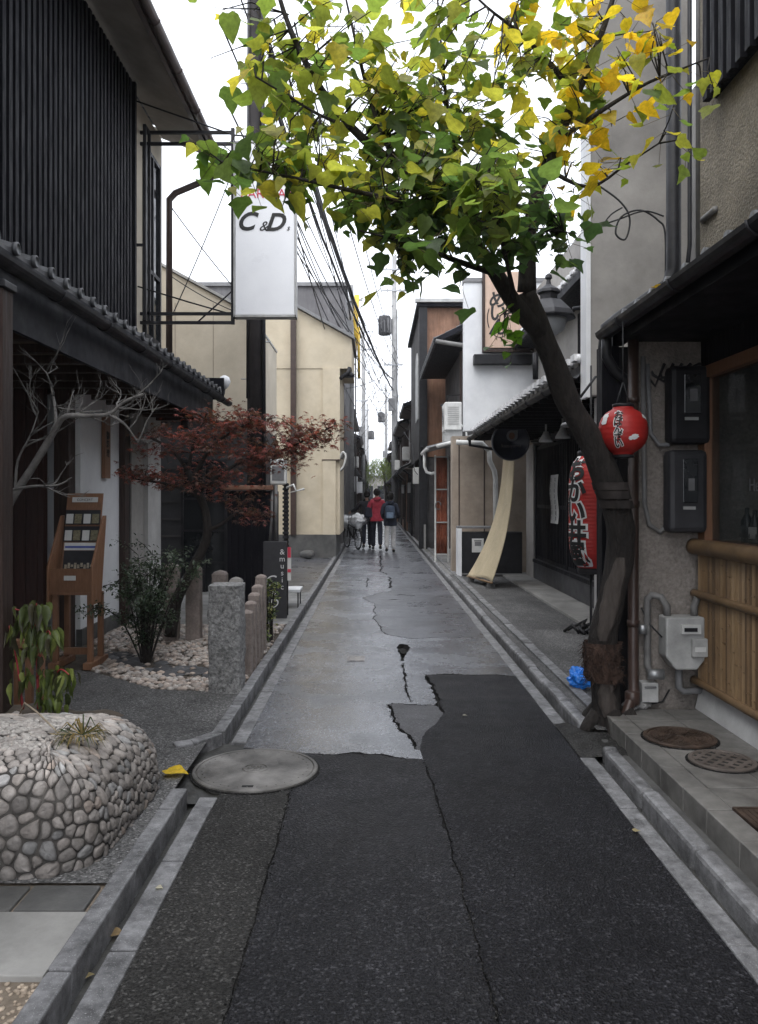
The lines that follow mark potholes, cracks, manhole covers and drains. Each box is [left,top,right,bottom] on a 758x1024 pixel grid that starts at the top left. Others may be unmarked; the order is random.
manhole cover [189,748,320,795]
crack [351,555,471,639]
crack [222,790,293,1024]
manhole cover [640,726,720,751]
crack [314,663,512,1024]
